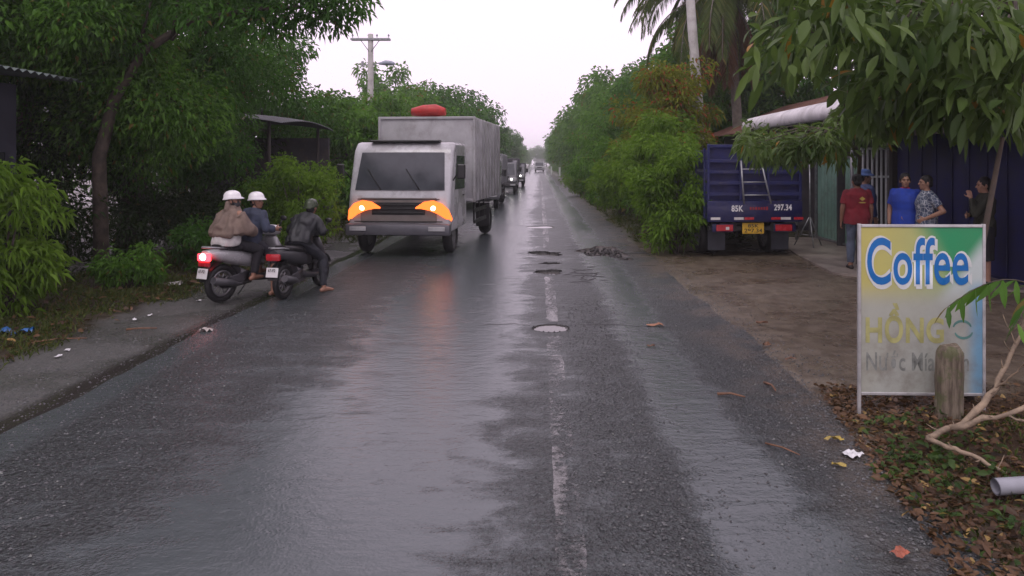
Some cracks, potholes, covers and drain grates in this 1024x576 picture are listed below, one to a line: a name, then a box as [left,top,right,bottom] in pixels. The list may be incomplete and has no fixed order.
crack [565,242,605,283]
pothole [574,246,630,258]
